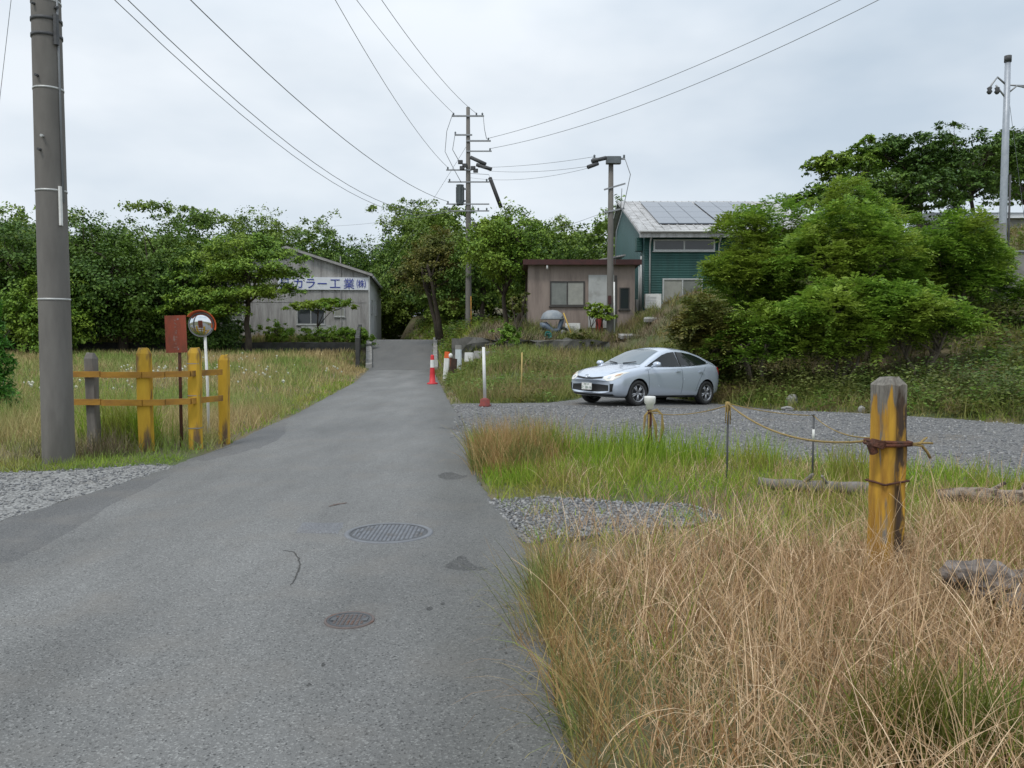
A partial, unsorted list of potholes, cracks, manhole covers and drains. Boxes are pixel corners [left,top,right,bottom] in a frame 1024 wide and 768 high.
manhole cover [324,611,375,629]
manhole cover [344,523,433,544]
